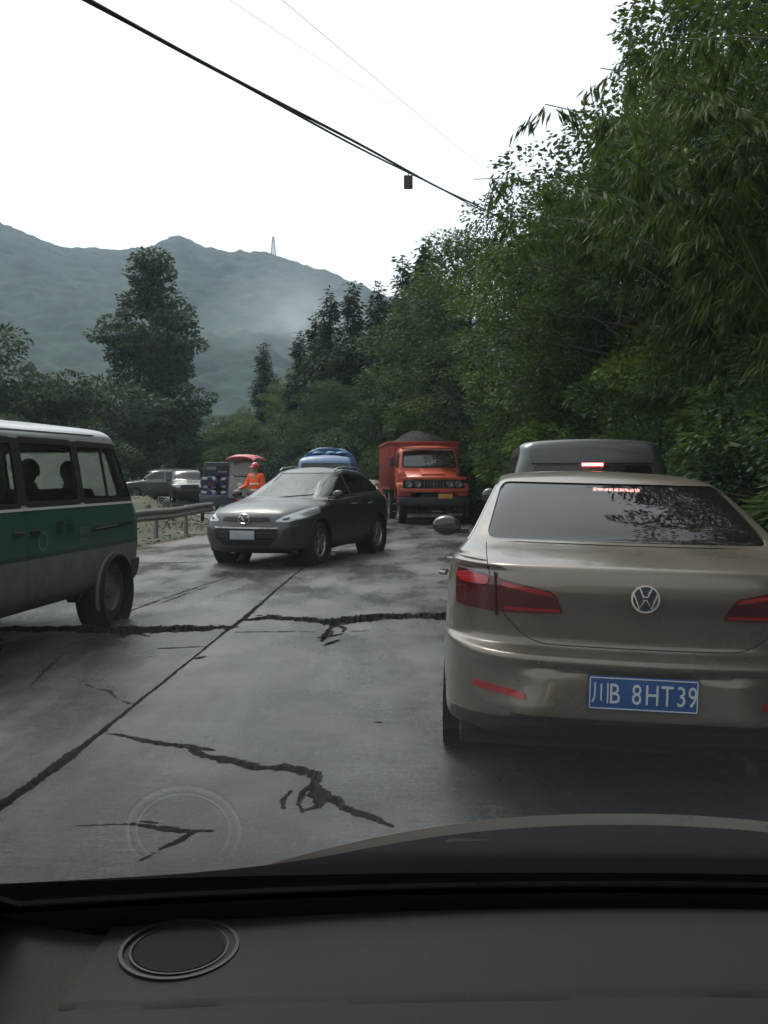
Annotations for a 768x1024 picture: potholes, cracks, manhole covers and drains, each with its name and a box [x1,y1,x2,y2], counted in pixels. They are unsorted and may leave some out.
crack [0,577,447,649]
crack [76,733,383,826]
crack [84,683,132,704]
crack [30,656,62,685]
